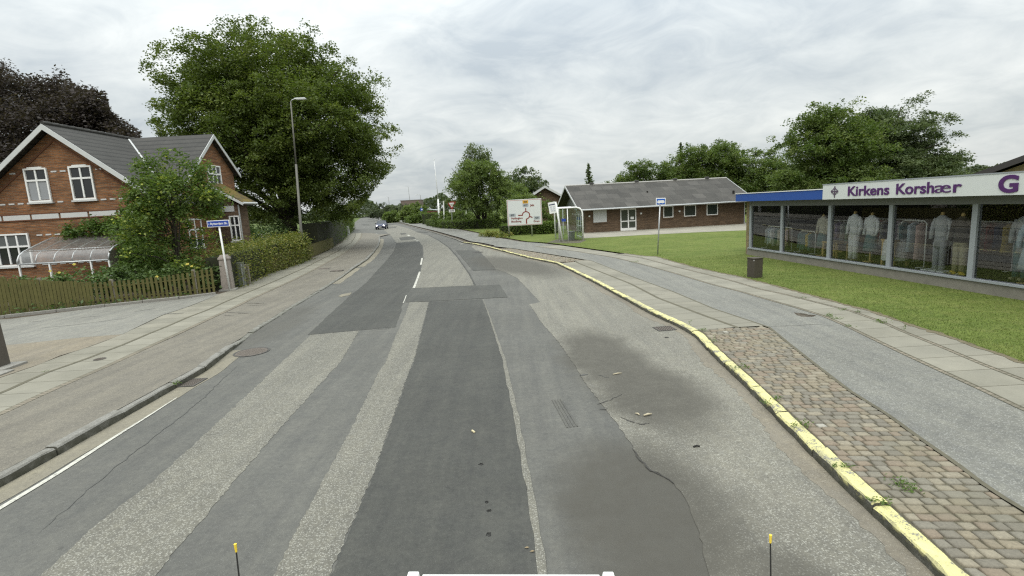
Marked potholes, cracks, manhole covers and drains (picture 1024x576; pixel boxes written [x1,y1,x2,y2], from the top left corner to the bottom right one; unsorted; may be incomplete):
drain grate [178,378,208,387]
manhole cover [233,347,270,357]
crack [633,449,672,482]
